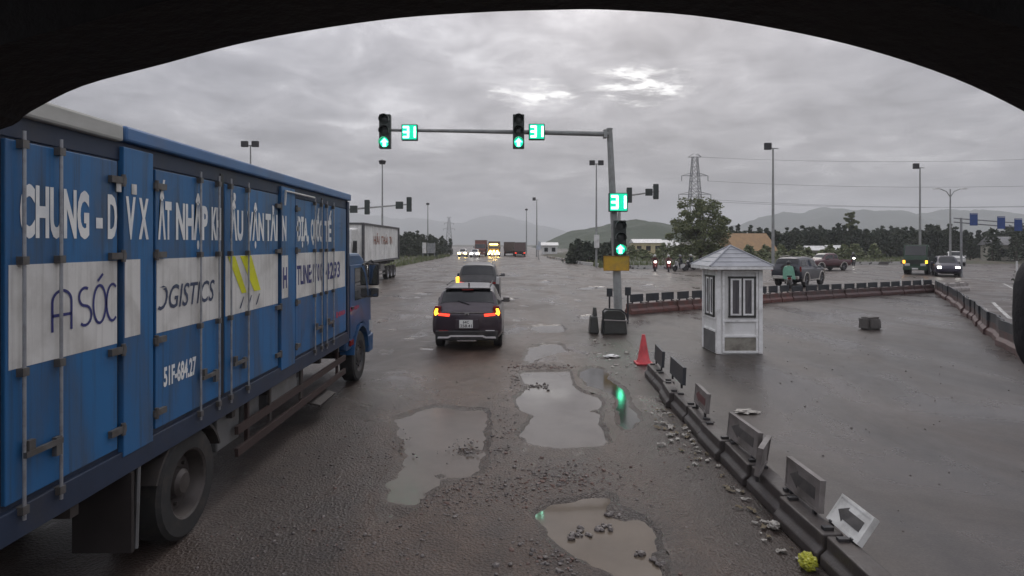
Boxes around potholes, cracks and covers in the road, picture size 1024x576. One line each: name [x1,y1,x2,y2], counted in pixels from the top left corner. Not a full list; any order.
pothole [374,404,493,522]
pothole [527,324,568,333]
pothole [577,365,644,434]
pothole [511,369,614,449]
pothole [530,491,672,576]
pothole [519,341,574,365]
